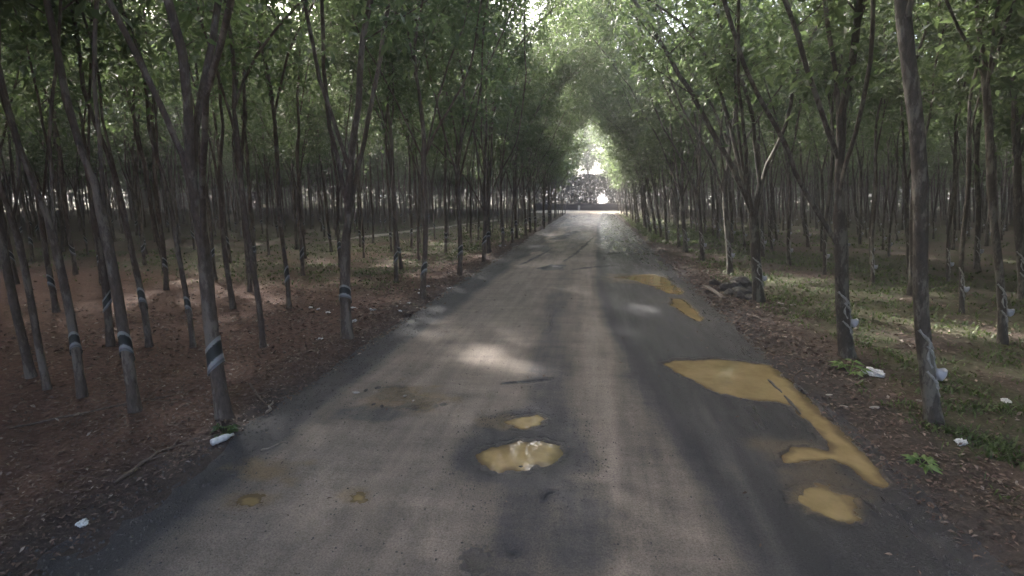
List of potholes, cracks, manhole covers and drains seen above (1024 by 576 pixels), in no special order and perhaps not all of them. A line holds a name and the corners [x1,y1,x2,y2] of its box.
crack [517,237,619,270]
pothole [655,356,901,494]
pothole [229,493,271,510]
pothole [499,412,551,432]
pothole [665,297,708,322]
pothole [347,491,372,505]
pothole [611,274,688,296]
pothole [768,379,869,528]
pothole [469,436,568,477]
